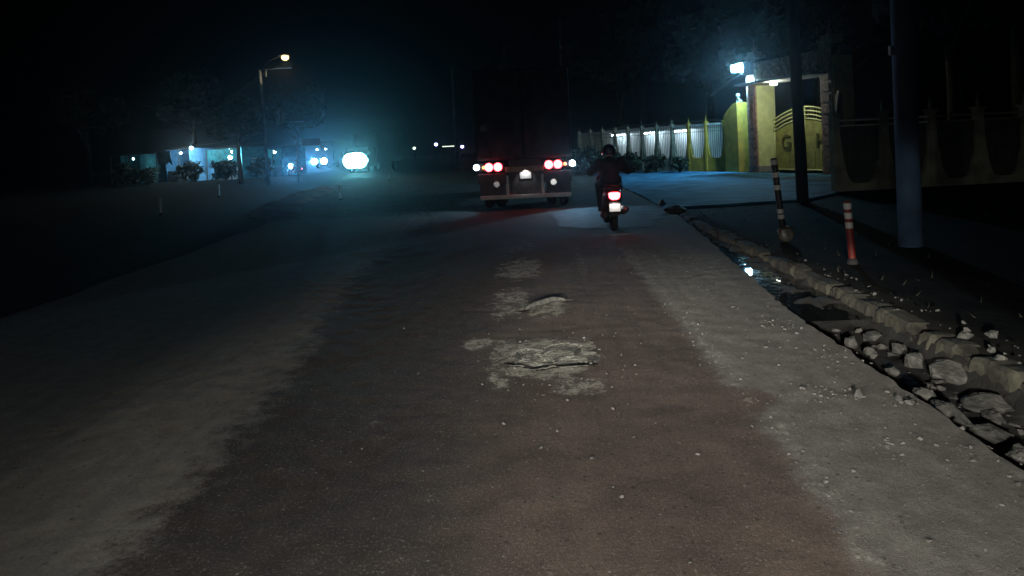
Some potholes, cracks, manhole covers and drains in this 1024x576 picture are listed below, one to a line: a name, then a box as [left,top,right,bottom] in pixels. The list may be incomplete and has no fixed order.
pothole [498,342,607,371]
